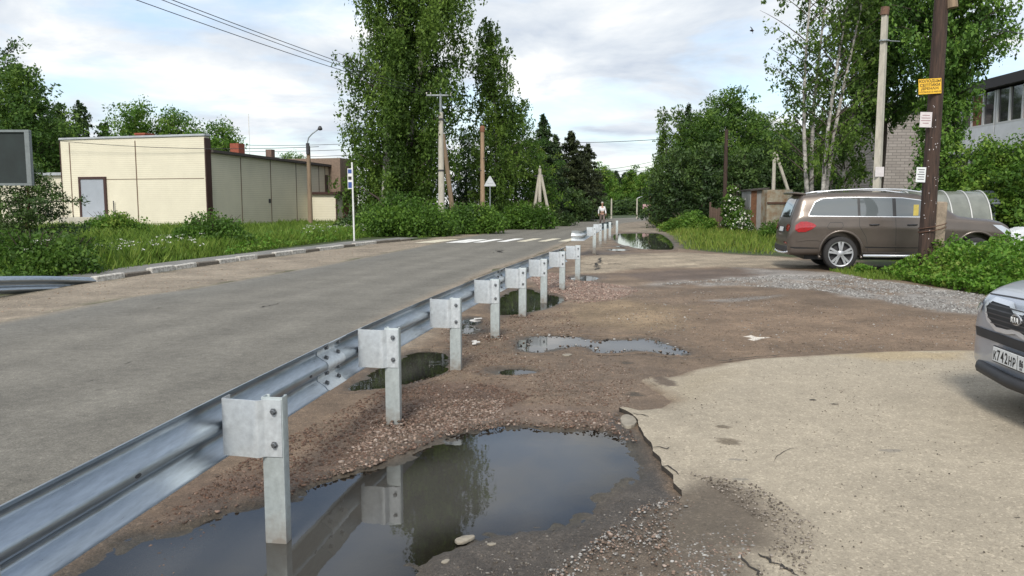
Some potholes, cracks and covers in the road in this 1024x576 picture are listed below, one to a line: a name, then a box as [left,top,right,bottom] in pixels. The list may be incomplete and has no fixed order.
pothole [503,333,704,357]
pothole [479,287,575,316]
pothole [477,365,550,377]
pothole [52,415,673,576]
pothole [606,232,685,250]
pothole [332,348,464,393]
crack [741,553,799,576]
